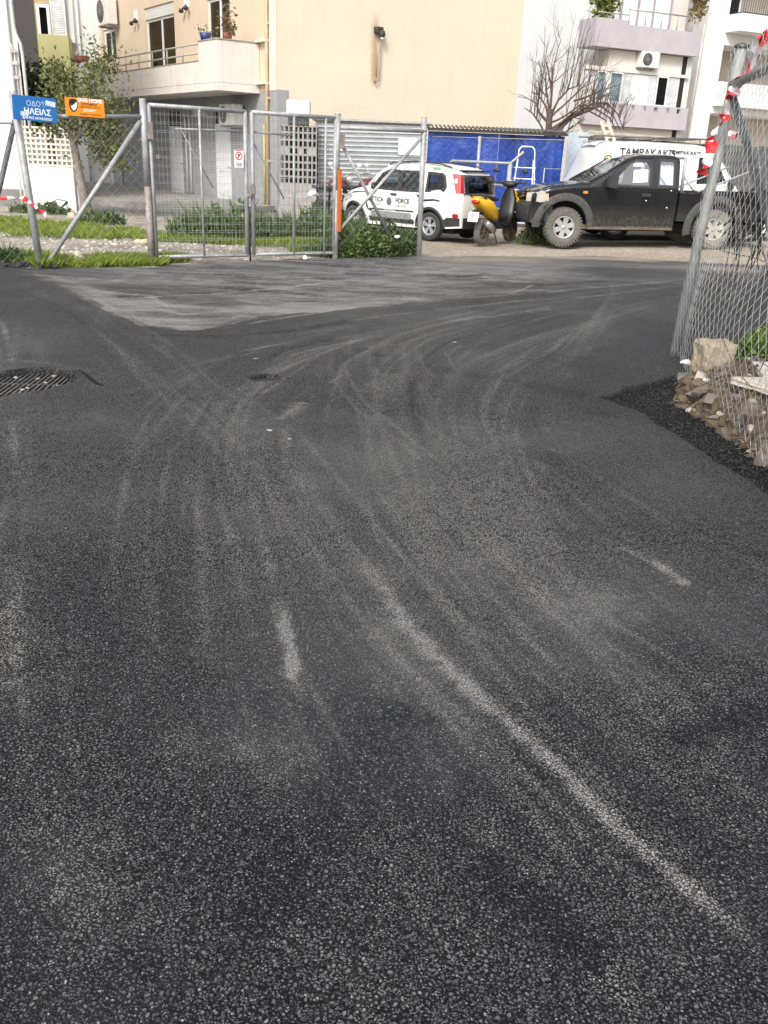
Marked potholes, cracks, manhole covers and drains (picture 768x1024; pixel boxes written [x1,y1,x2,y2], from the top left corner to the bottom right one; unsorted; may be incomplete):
pothole [249,374,279,382]
drain grate [0,373,72,397]
